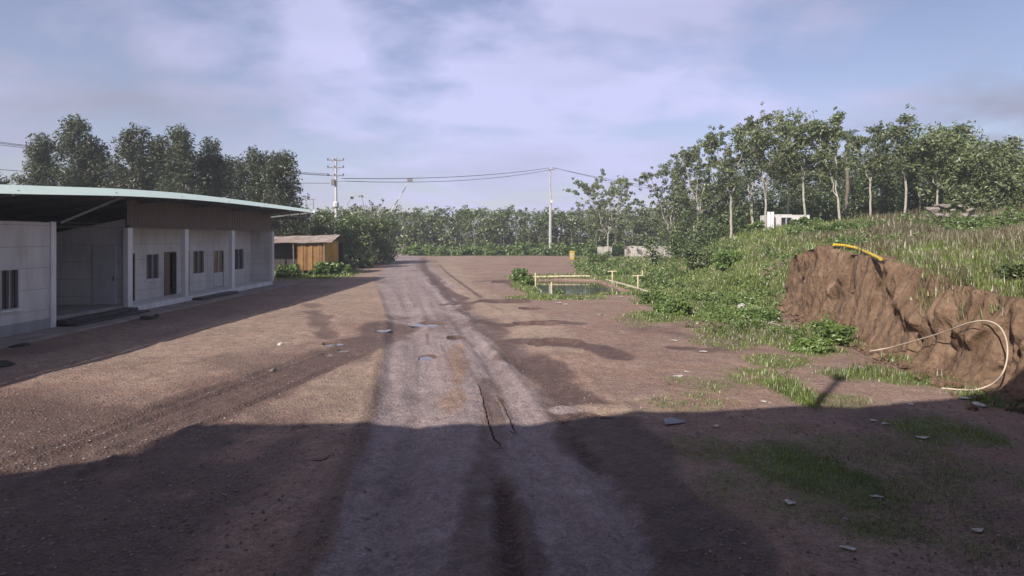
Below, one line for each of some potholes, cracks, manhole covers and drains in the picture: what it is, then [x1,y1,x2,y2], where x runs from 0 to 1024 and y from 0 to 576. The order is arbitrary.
pothole [417,354,438,362]
crack [475,383,518,449]
